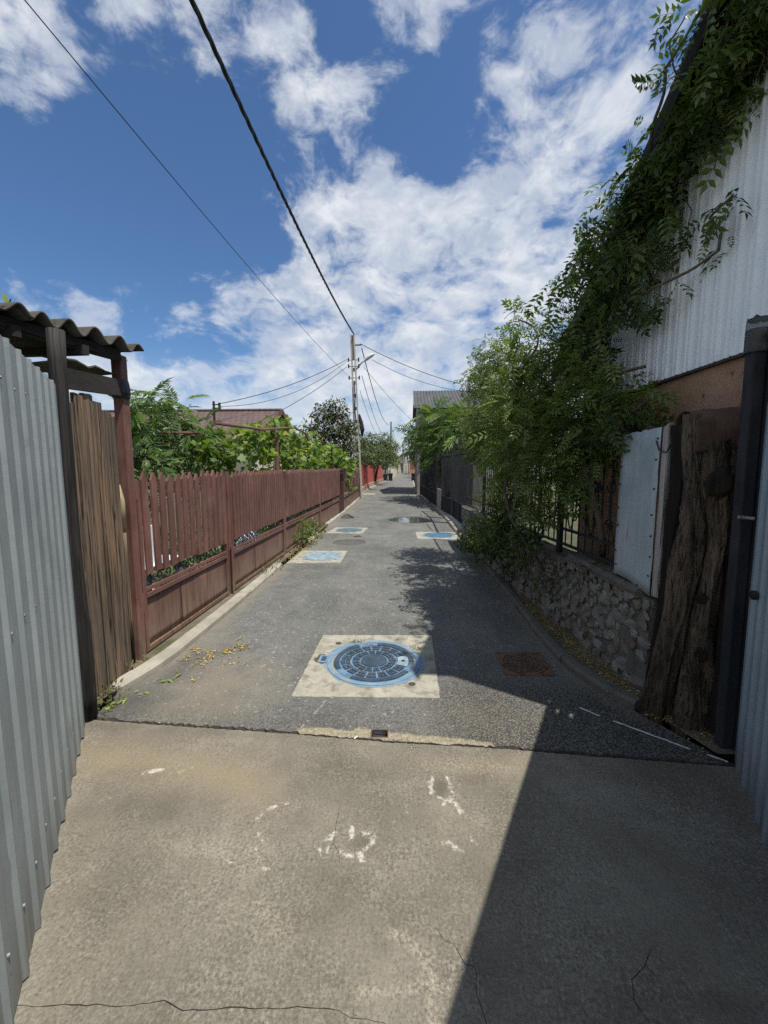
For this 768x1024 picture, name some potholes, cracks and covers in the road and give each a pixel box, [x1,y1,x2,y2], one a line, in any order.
manhole cover [291,635,440,698]
manhole cover [287,551,347,563]
crack [17,1000,385,1024]
manhole cover [494,652,557,677]
crack [631,949,657,1023]
crack [436,928,487,1024]
